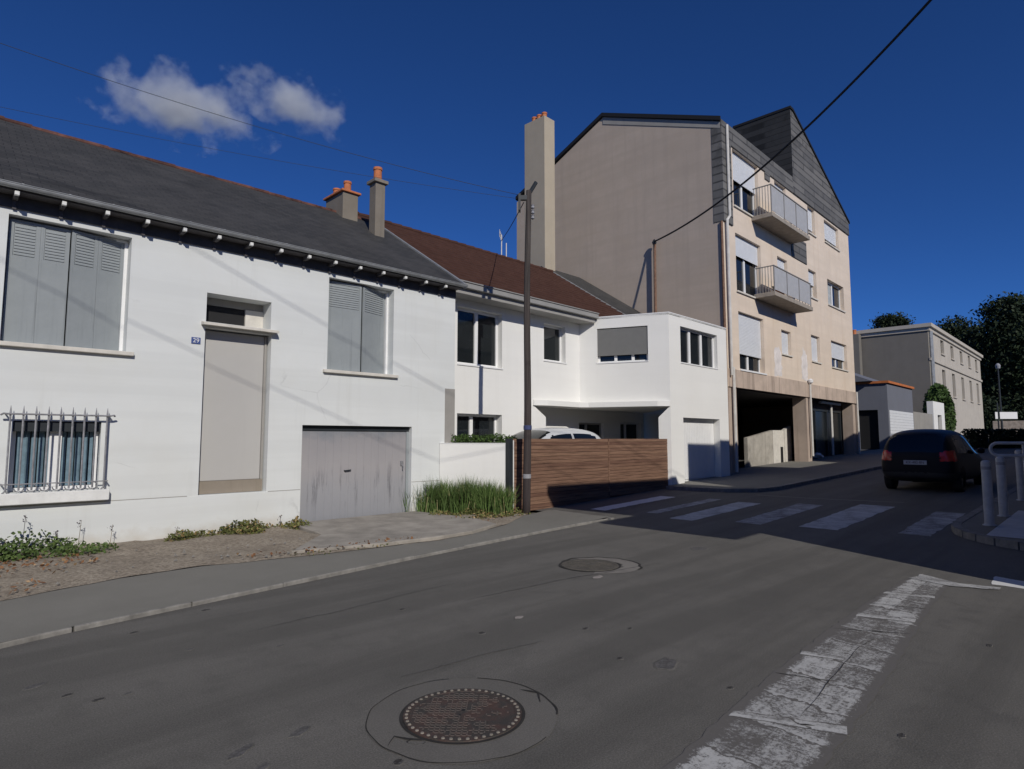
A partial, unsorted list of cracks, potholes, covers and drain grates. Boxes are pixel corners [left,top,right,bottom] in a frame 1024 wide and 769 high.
crack [776,628,909,726]
crack [404,641,539,676]
manhole cover [365,678,558,764]
manhole cover [559,557,643,574]
